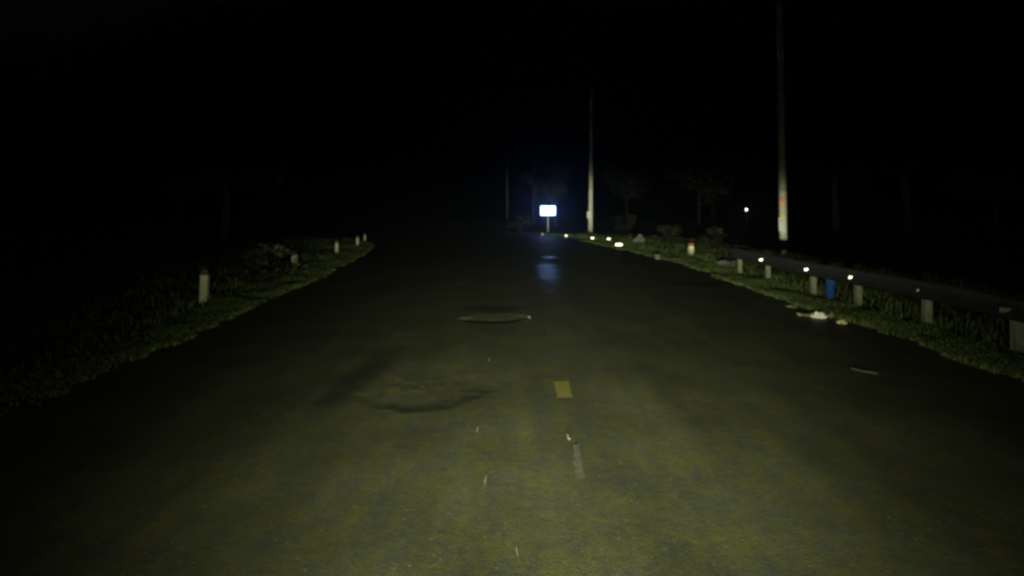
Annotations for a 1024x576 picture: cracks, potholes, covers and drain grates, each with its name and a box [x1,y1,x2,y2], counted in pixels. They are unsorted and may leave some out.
pothole [351,359,500,414]
